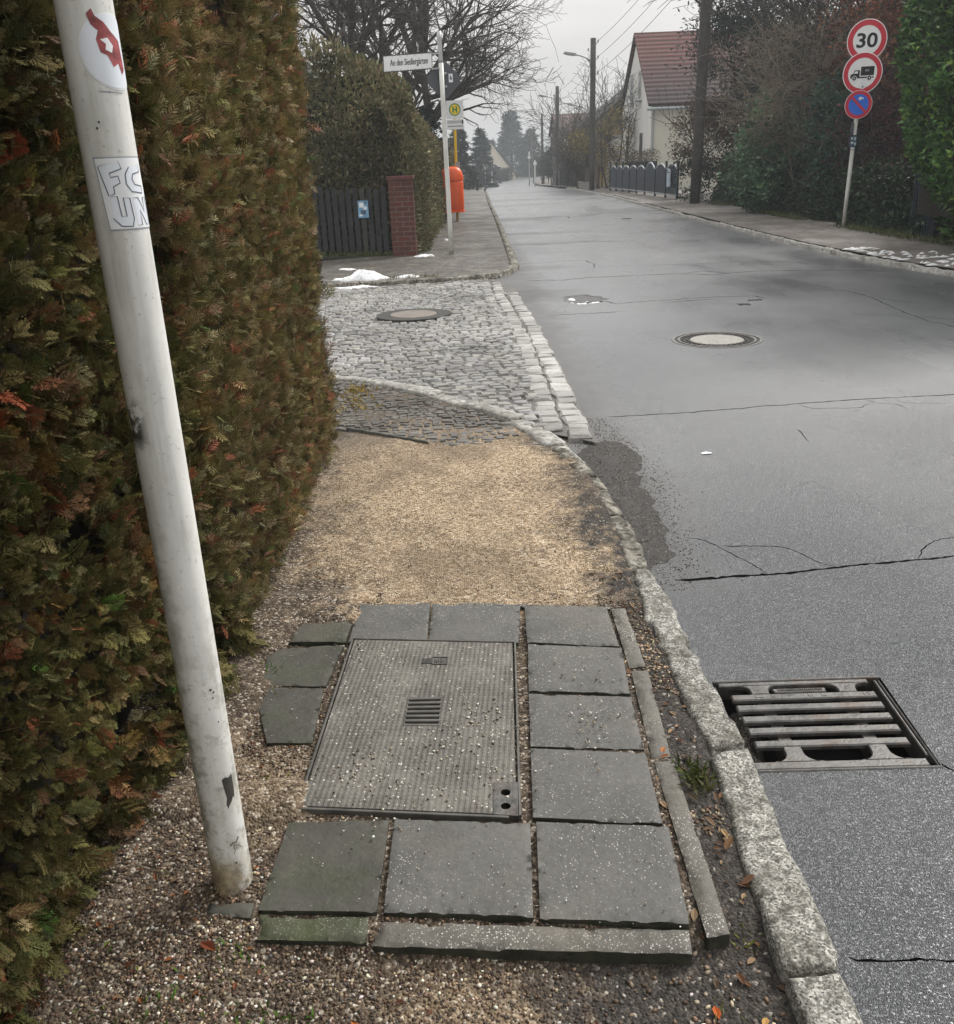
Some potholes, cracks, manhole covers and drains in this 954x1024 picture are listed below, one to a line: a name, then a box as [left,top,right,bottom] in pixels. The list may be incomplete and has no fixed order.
manhole cover [672,331,763,348]
crack [840,290,953,327]
pothole [563,294,608,305]
crack [676,537,954,581]
manhole cover [377,308,450,323]
utility cover [300,638,522,823]
drain grate [712,676,943,773]
